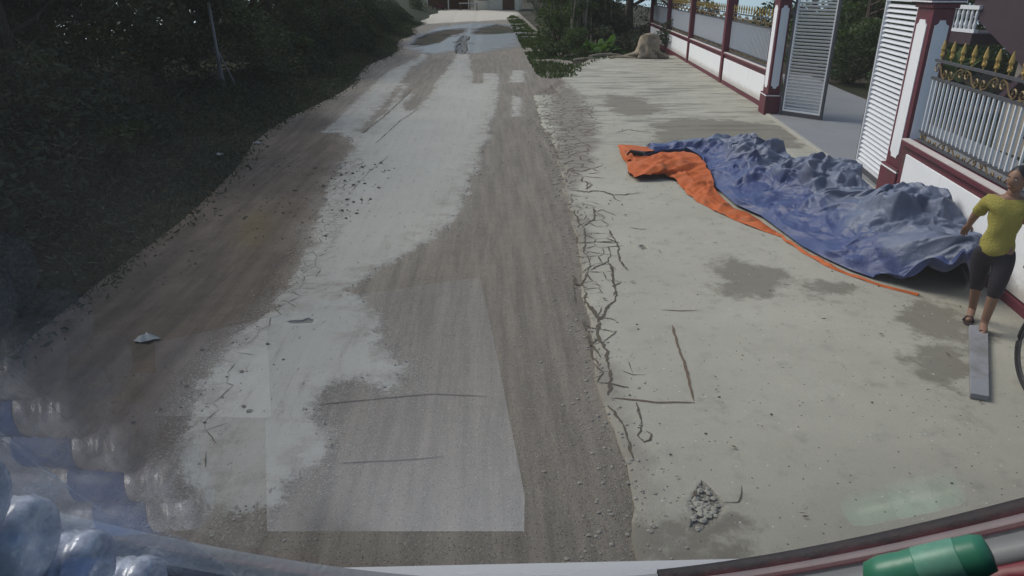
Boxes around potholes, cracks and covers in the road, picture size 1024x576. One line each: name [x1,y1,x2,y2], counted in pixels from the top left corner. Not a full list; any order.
crack [198,89,419,467]
crack [537,83,652,459]
pothole [677,474,734,541]
